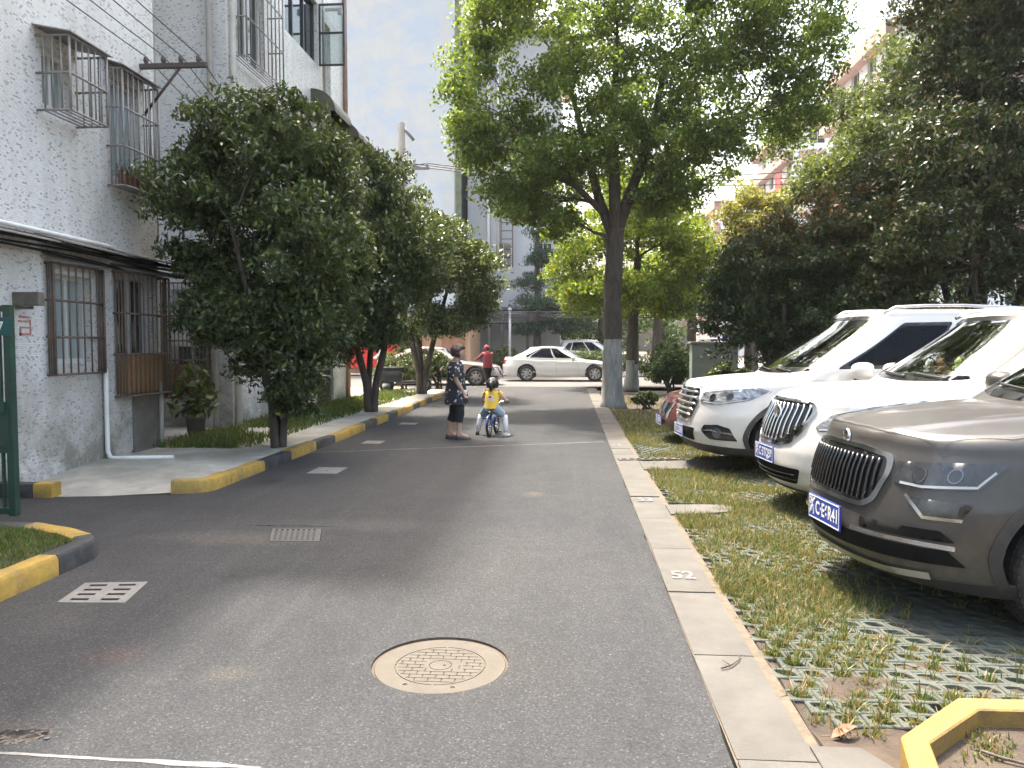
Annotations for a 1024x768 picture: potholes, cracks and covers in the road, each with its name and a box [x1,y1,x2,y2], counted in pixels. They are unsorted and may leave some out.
manhole cover [371,637,508,694]
drain grate [269,529,322,542]
pothole [0,728,53,745]
